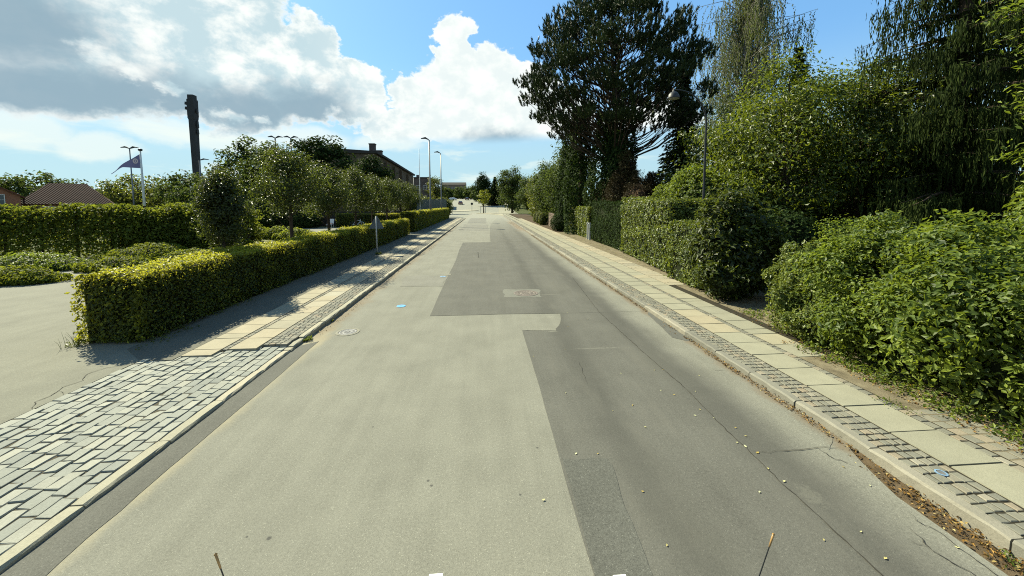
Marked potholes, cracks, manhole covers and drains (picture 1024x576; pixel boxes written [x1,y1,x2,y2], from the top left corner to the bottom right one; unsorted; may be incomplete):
manhole cover [335,328,360,336]
crack [909,512,998,576]
